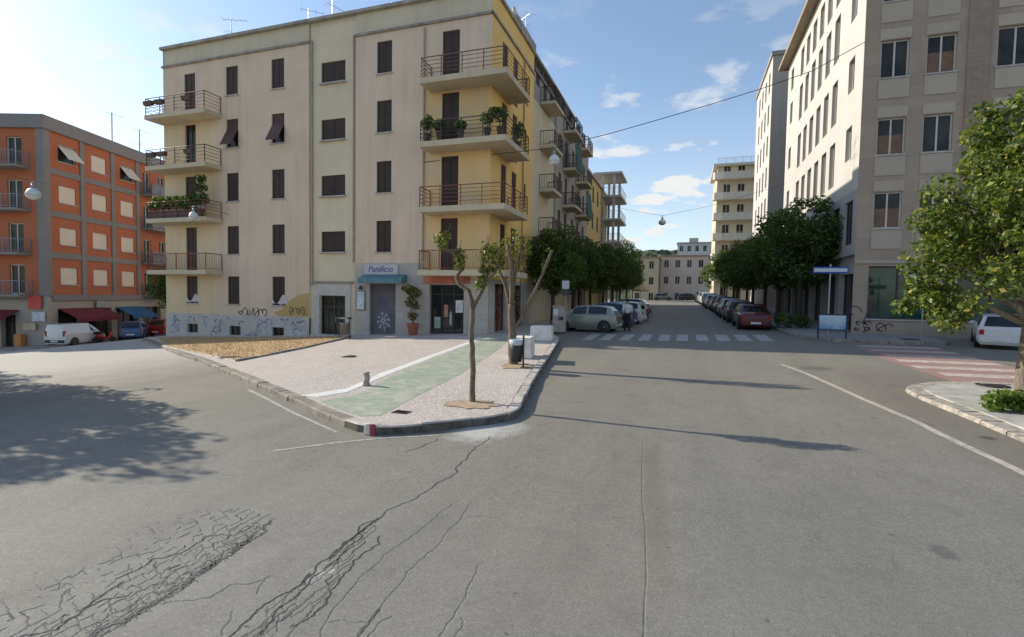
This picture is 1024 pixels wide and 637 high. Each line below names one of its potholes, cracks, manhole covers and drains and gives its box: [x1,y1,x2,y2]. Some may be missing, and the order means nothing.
crack [0,438,496,637]
